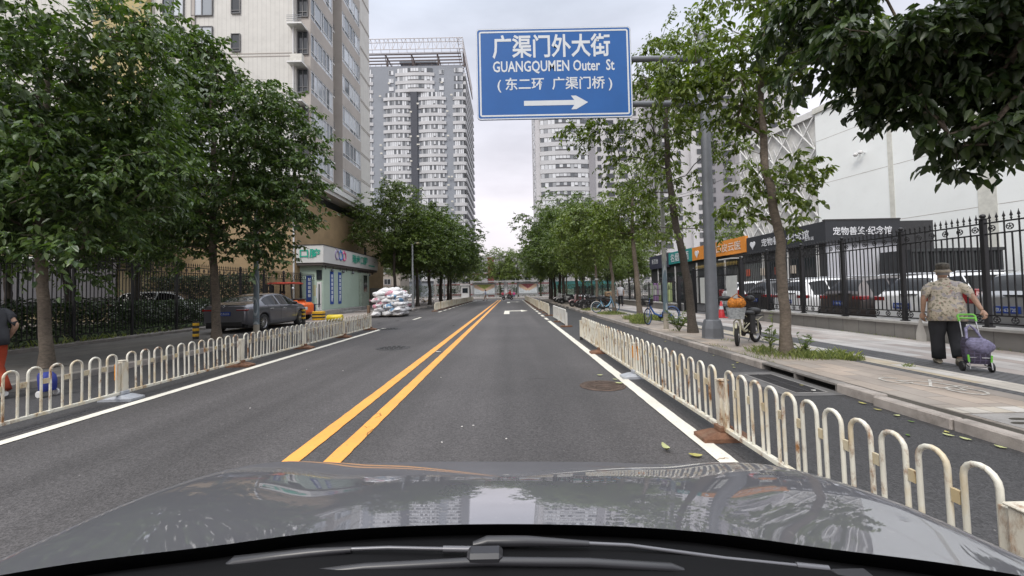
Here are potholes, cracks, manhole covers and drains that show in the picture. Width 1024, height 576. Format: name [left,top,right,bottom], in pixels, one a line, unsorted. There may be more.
drain grate [728,372,845,396]
manhole cover [580,380,626,391]
